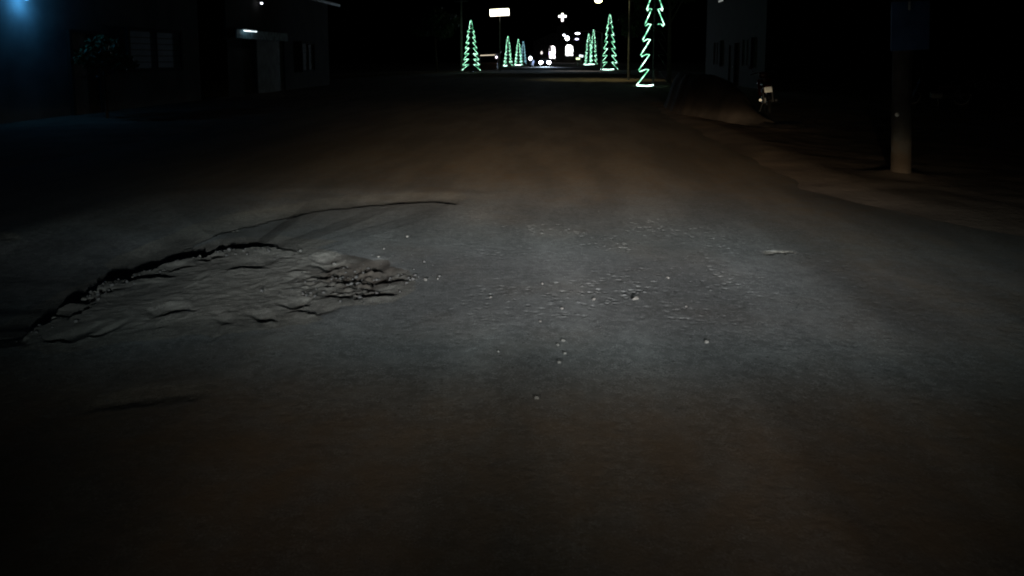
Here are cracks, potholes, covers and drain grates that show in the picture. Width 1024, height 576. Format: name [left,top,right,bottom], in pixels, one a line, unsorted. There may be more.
crack [105,193,466,271]
pothole [0,235,418,354]
crack [84,384,211,412]
